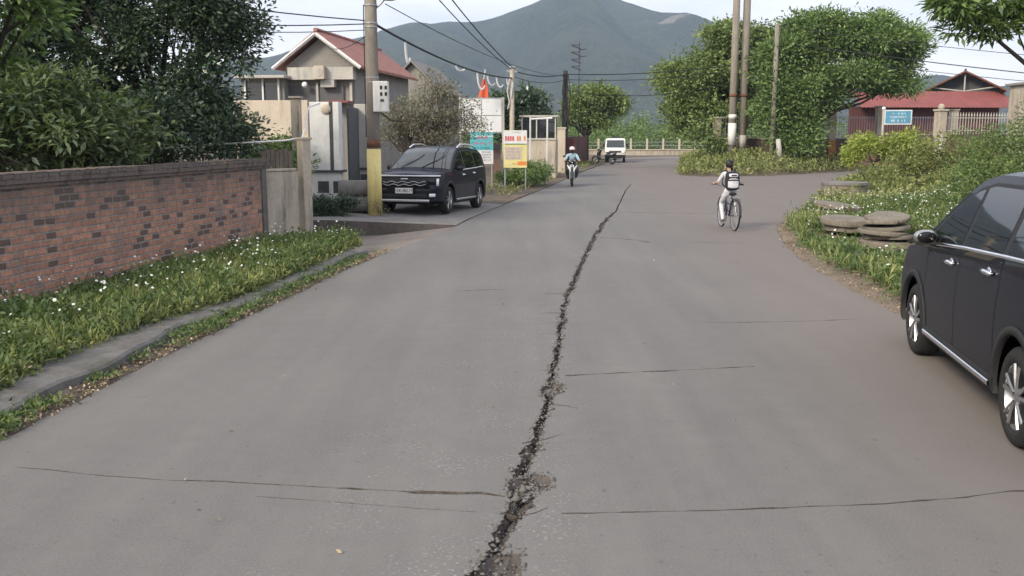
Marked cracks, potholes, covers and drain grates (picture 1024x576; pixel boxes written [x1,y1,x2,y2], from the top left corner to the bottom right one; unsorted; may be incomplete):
crack [18,186,754,576]
crack [561,490,1024,514]
